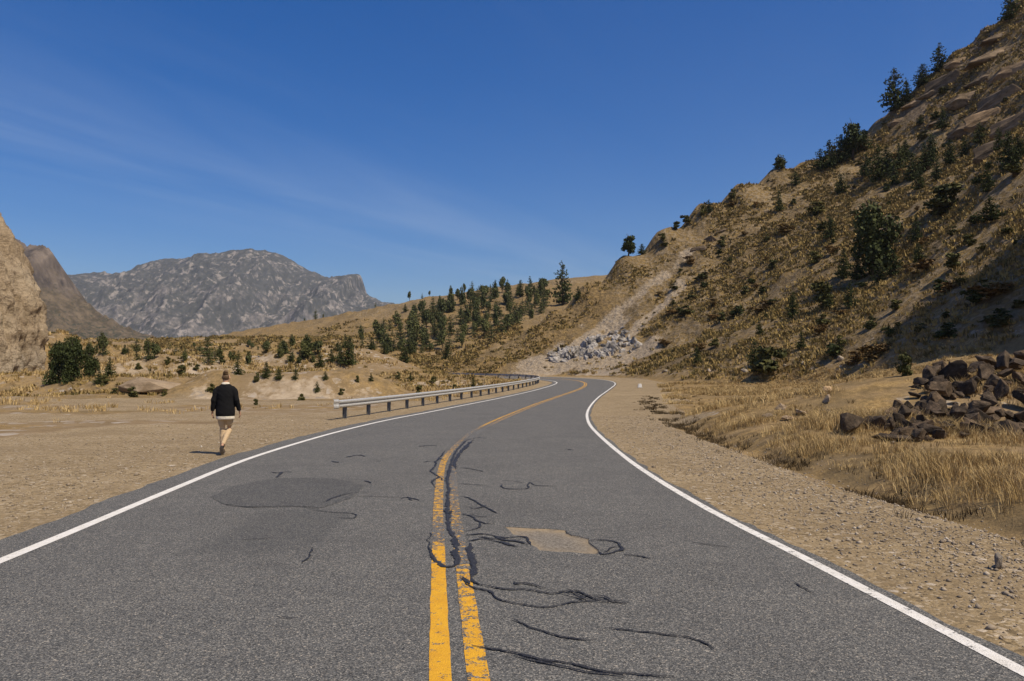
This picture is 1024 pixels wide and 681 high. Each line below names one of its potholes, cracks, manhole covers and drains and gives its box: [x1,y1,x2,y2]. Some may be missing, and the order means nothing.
crack [590,539,650,558]
crack [402,445,481,500]
